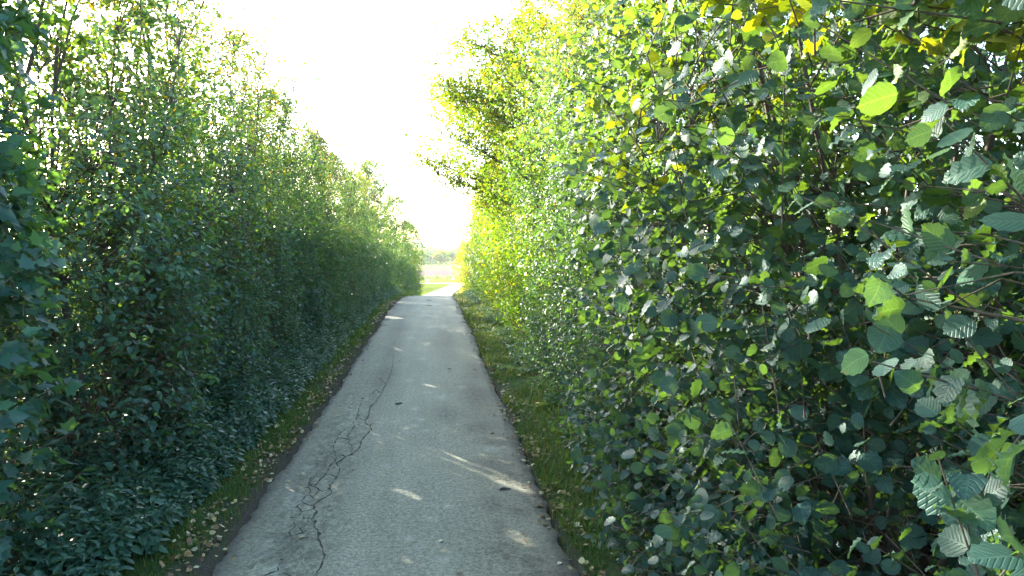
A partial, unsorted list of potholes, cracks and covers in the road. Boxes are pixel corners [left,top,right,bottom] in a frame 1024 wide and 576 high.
crack [264,354,393,576]
